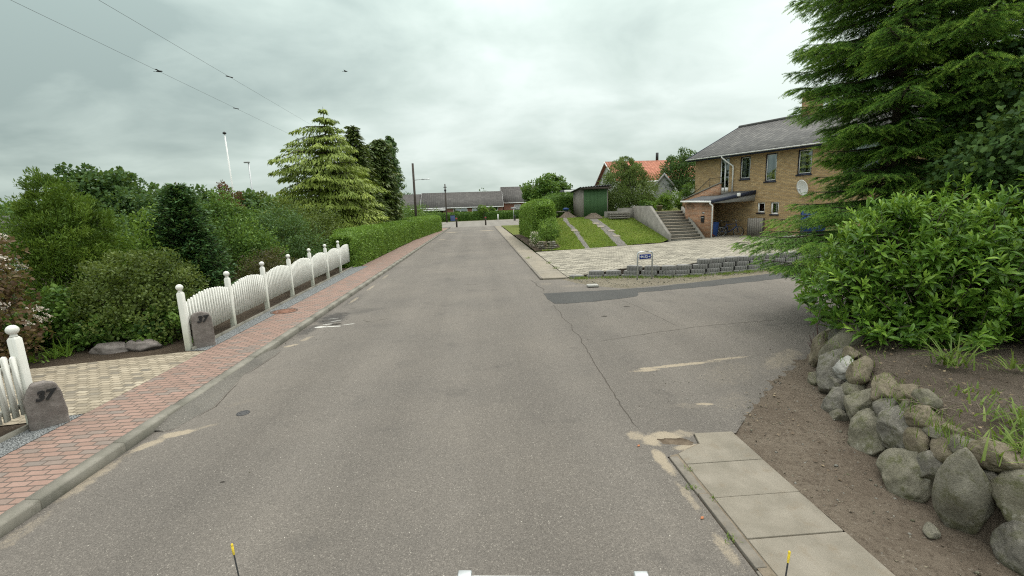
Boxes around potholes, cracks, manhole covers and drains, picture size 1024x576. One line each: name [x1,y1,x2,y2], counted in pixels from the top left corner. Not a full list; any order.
crack [531,280,781,430]
